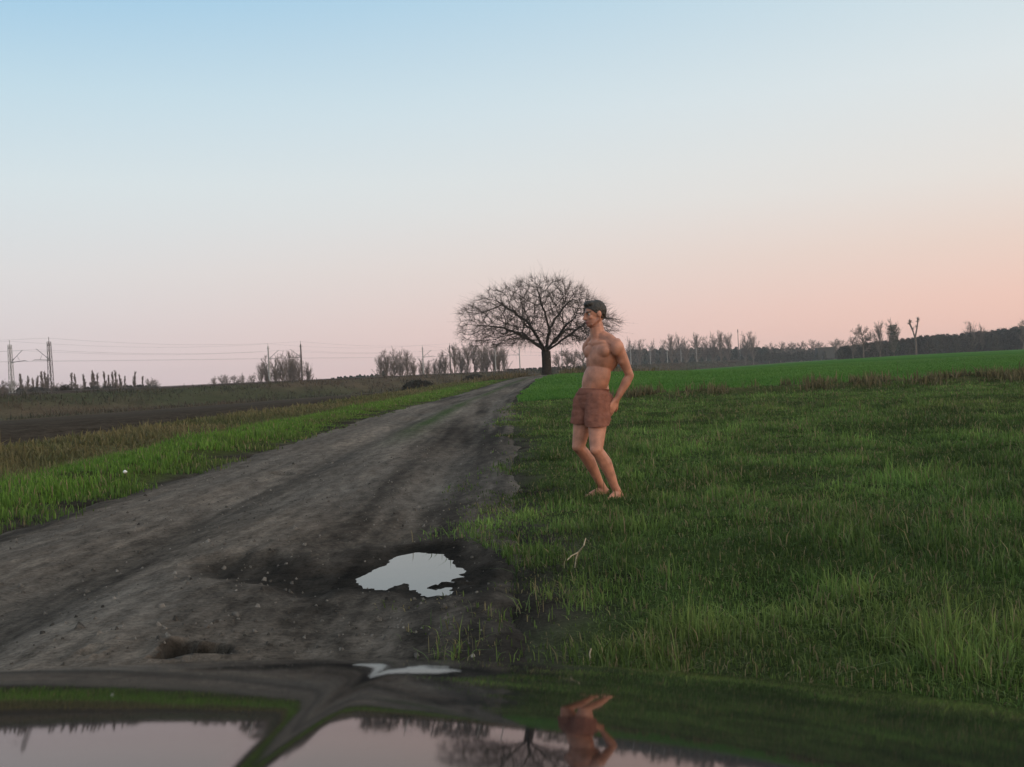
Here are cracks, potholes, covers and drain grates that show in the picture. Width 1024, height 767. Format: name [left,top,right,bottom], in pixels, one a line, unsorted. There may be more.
pothole [331,545,496,599]
pothole [143,636,239,660]
